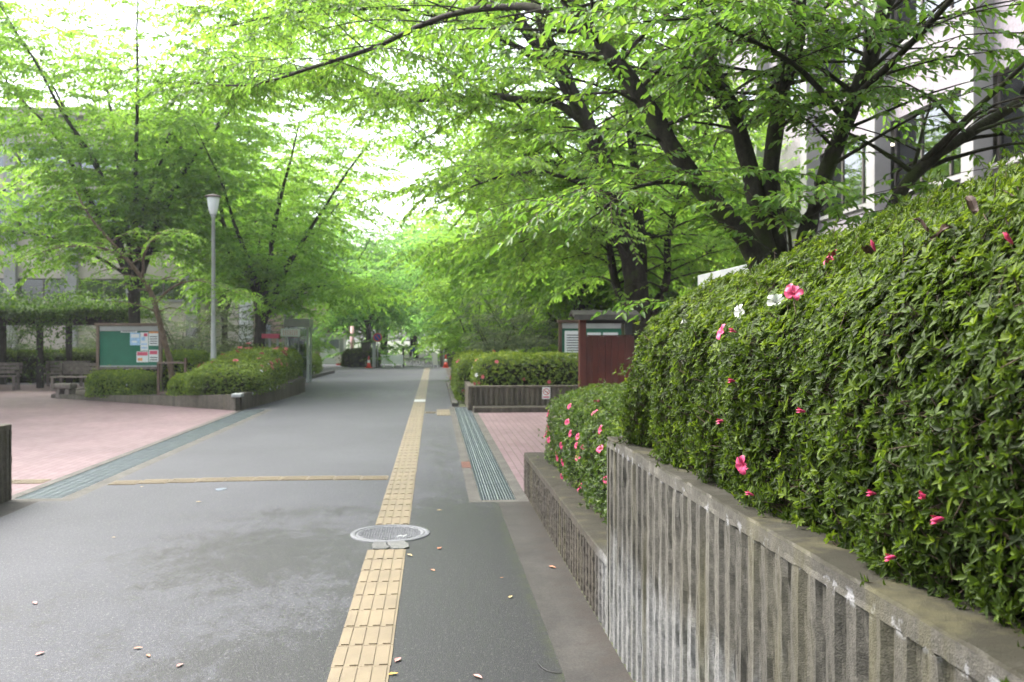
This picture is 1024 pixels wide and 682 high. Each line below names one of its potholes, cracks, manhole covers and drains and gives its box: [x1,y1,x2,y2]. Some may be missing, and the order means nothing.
drain grate [145,441,192,449]
drain grate [463,435,487,443]
drain grate [473,471,508,485]
drain grate [470,460,501,471]
drain grate [15,482,97,499]
drain grate [90,458,153,470]
drain grate [119,449,174,459]
drain grate [477,484,516,500]
drain grate [57,469,127,483]
drain grate [465,442,491,450]
manhole cover [350,524,430,543]
drain grate [467,450,496,460]
